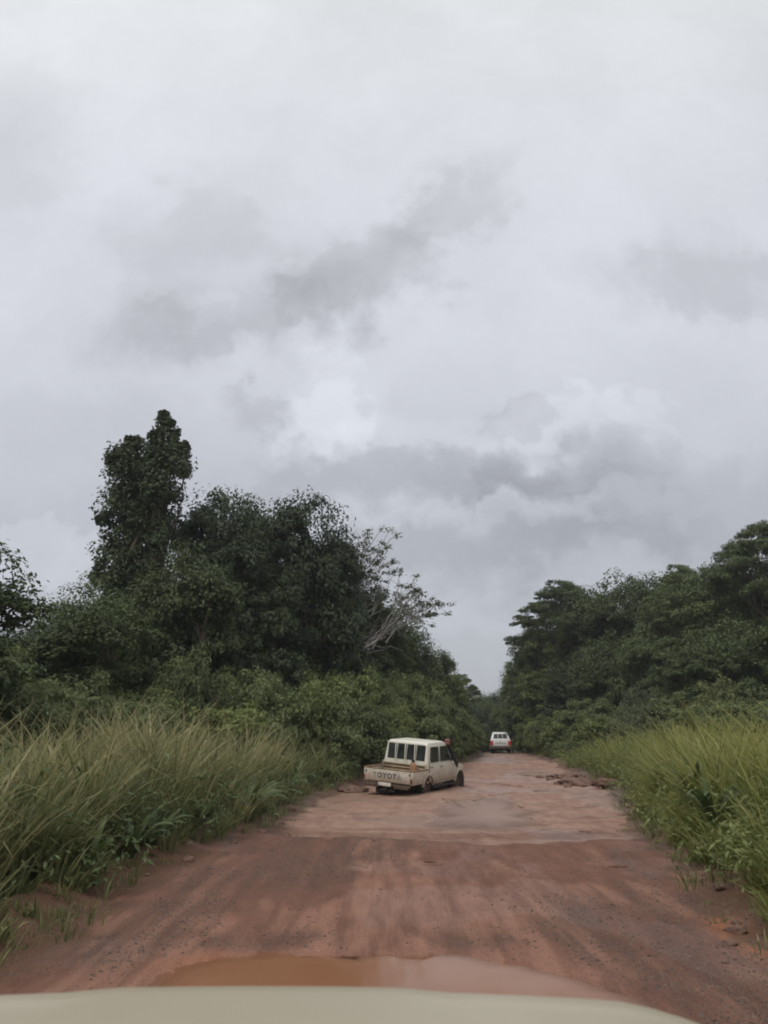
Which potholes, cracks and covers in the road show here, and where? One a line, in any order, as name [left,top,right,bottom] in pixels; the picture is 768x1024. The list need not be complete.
pothole [408,793,563,839]
